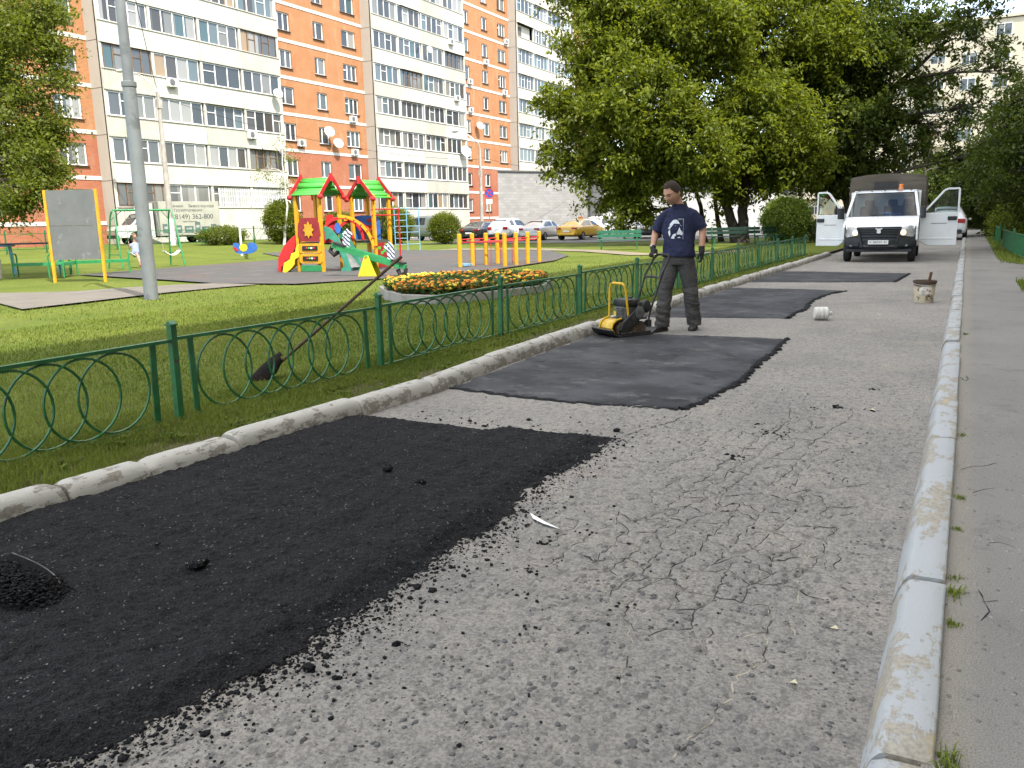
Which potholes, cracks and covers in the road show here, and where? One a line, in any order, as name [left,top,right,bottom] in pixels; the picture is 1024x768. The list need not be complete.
crack [548,407,865,760]
